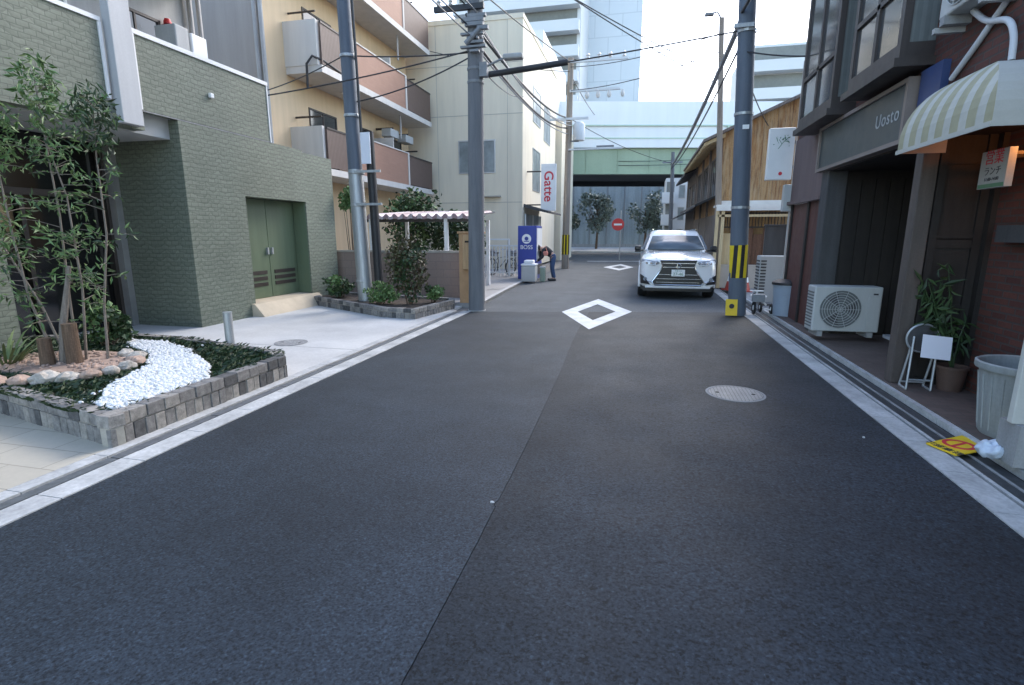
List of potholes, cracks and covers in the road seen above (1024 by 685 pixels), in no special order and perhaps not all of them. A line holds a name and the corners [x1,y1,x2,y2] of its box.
manhole cover [705,385,766,402]
